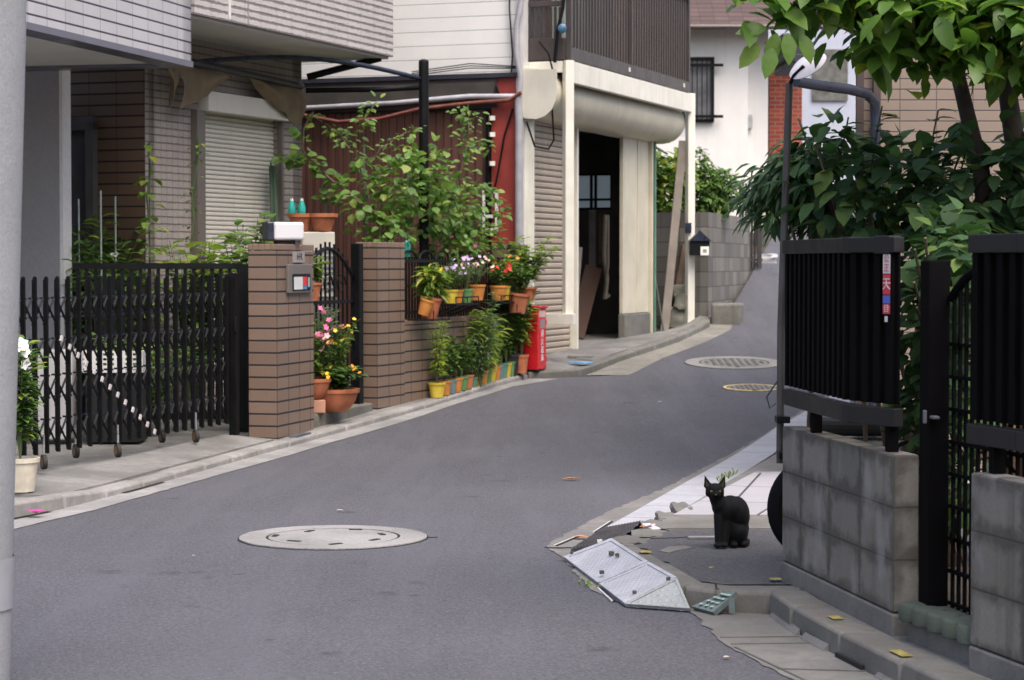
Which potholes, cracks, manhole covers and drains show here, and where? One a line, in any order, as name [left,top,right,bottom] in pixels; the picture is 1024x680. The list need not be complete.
manhole cover [722,384,777,392]
manhole cover [237,525,428,551]
manhole cover [684,356,777,369]
